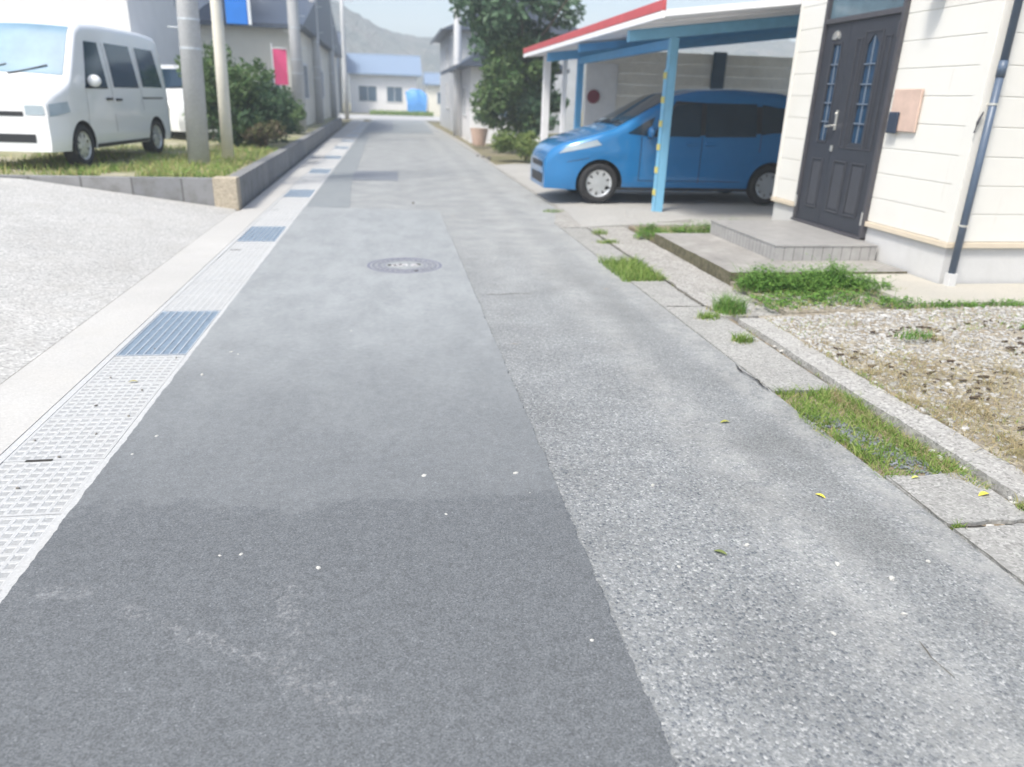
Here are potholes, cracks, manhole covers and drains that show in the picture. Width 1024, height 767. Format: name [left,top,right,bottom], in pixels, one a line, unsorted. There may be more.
drain grate [236,226,287,242]
drain grate [283,189,315,197]
manhole cover [367,258,442,273]
drain grate [115,310,221,357]
